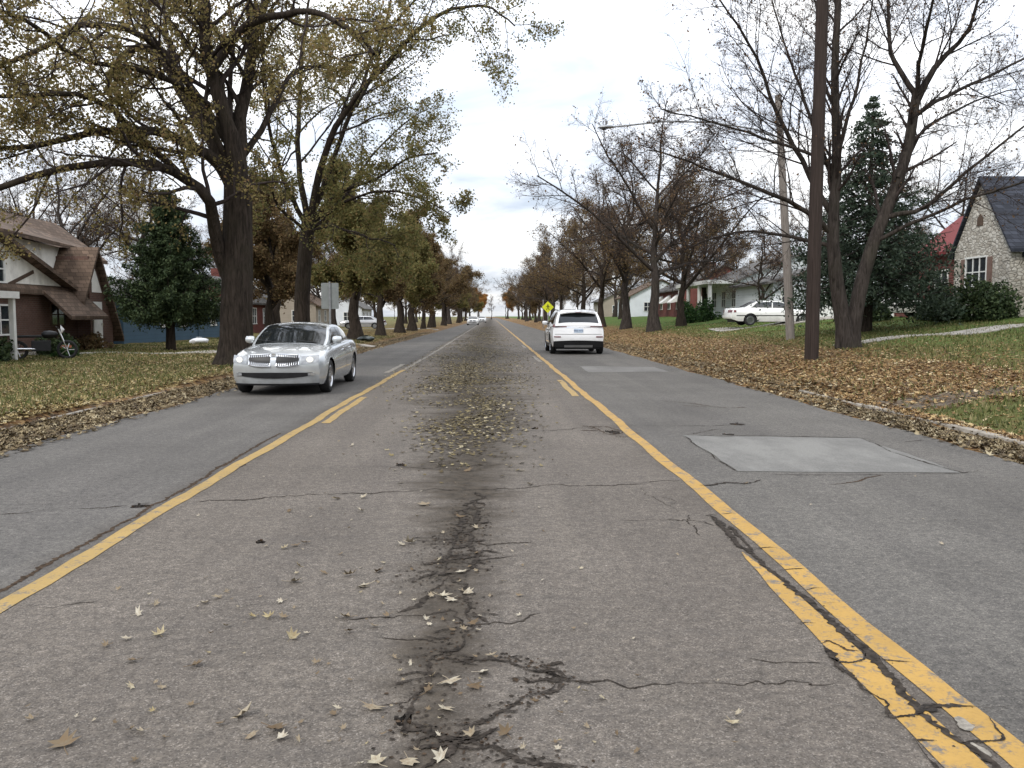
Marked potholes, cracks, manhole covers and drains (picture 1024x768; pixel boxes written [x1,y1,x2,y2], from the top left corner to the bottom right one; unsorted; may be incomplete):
crack [542,425,636,438]
crack [0,433,1012,768]
